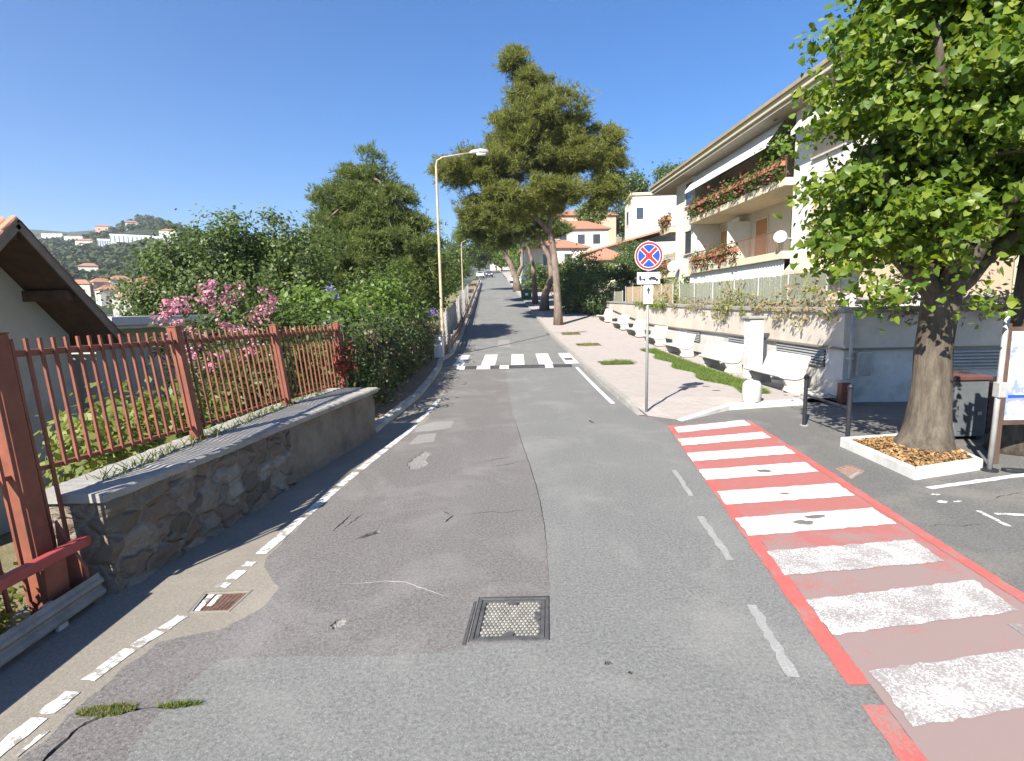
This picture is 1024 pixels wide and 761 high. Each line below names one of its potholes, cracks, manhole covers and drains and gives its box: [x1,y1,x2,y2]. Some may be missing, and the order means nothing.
manhole cover [462,597,549,645]
crack [339,581,464,598]
pothole [330,618,347,630]
crack [42,703,207,761]
